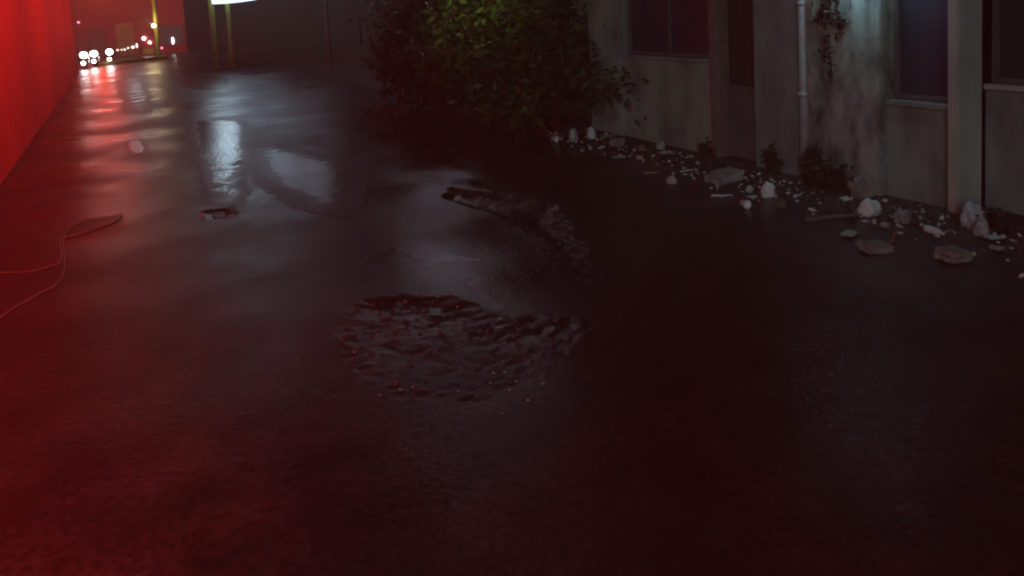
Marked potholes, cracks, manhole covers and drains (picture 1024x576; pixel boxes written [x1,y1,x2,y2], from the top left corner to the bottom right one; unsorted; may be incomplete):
pothole [196,208,243,222]
pothole [332,292,596,404]
pothole [439,187,605,286]
